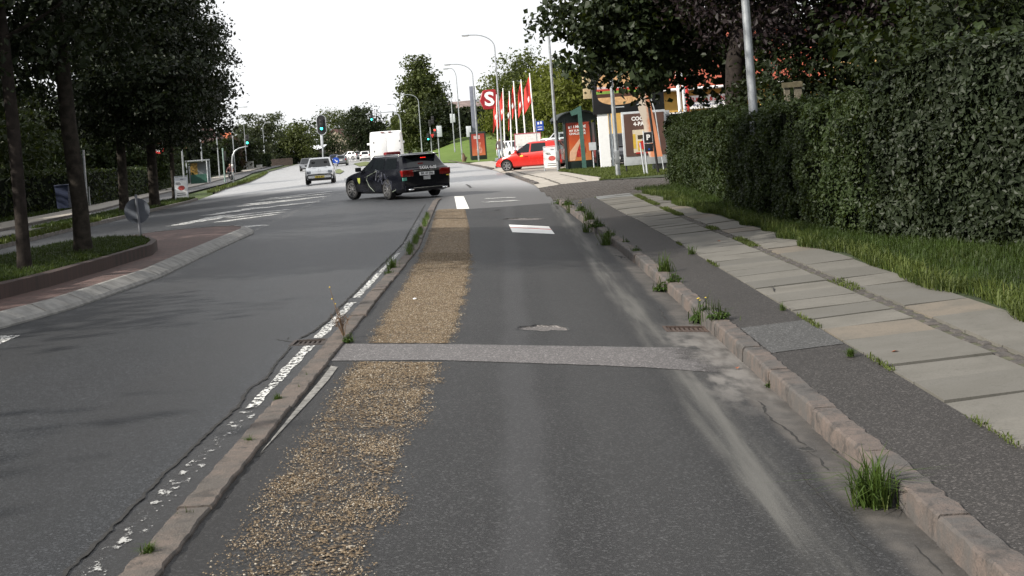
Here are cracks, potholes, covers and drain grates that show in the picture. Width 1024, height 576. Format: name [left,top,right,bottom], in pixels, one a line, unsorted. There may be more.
crack [914,544,942,573]
pothole [514,324,572,332]
crack [758,401,877,556]
